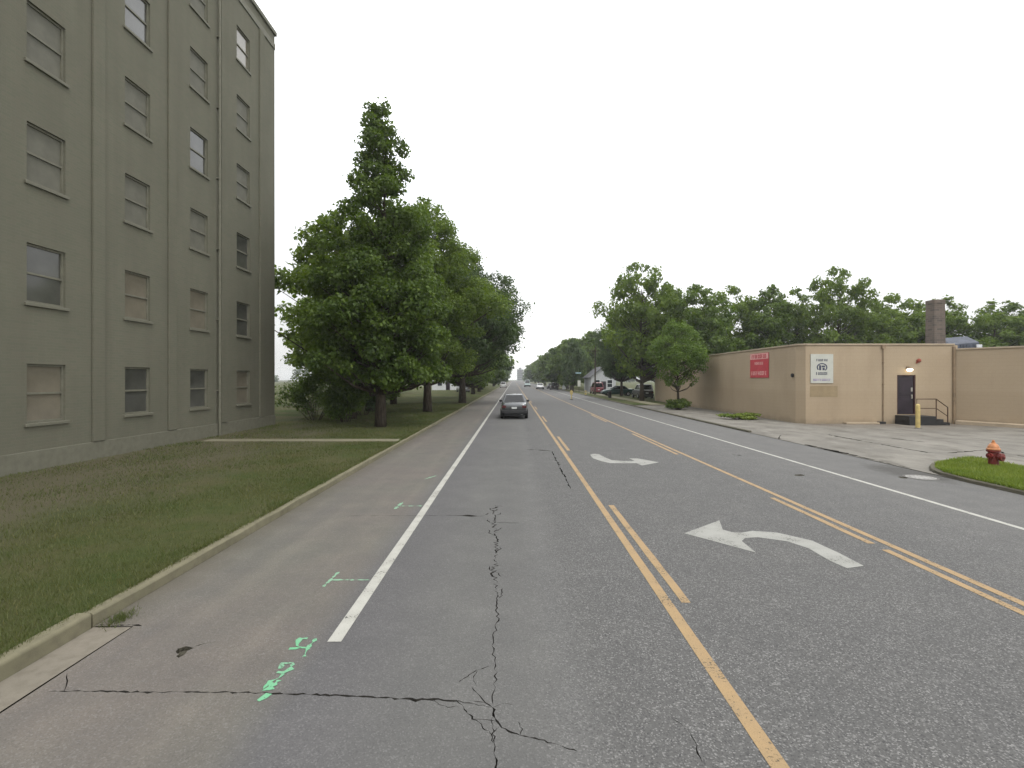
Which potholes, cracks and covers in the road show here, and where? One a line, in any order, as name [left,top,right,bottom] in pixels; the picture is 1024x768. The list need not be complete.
pothole [176,642,211,658]
crack [59,506,576,768]
